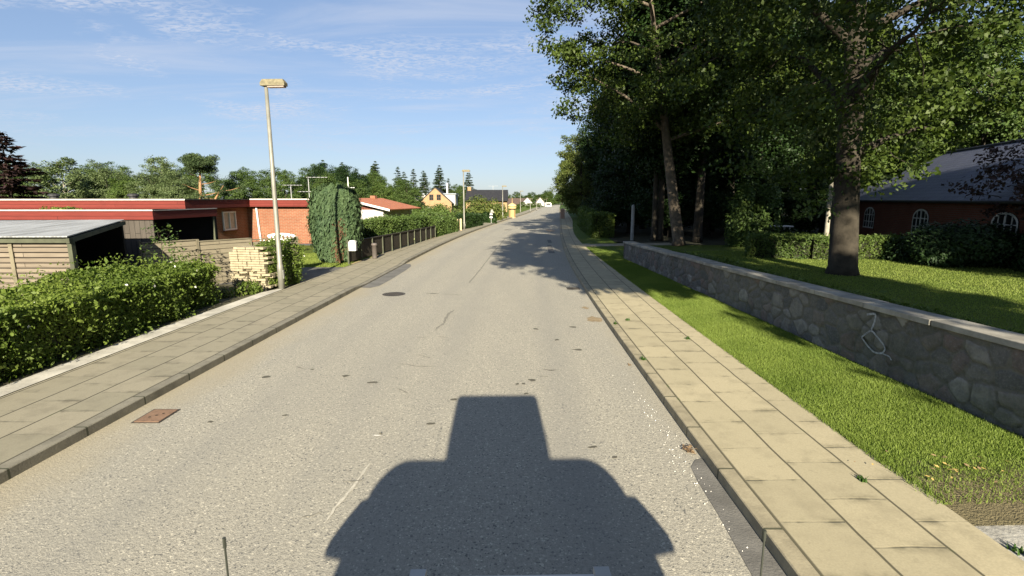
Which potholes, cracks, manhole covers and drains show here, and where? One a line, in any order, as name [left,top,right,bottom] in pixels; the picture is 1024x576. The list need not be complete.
crack [420,293,454,338]
